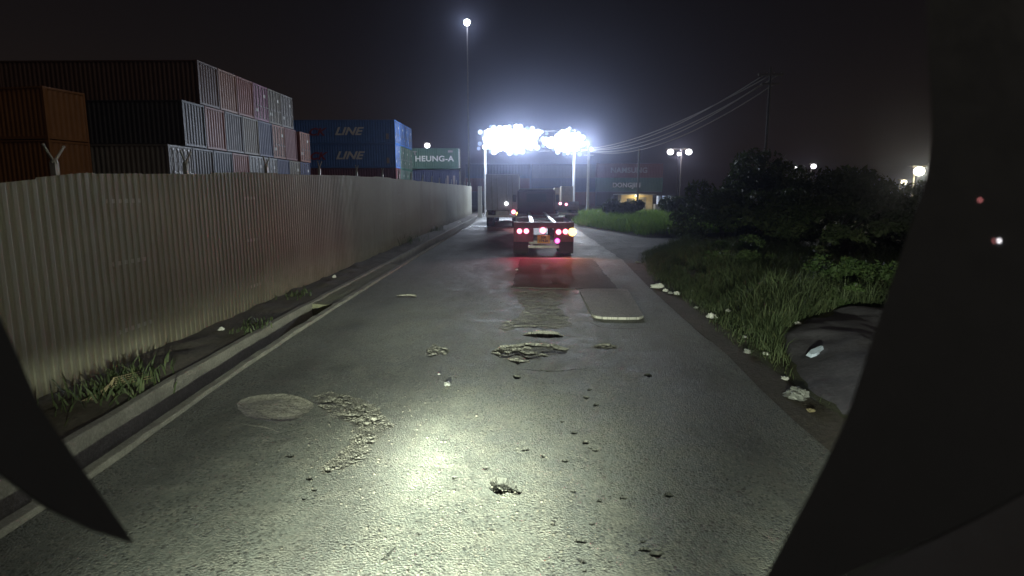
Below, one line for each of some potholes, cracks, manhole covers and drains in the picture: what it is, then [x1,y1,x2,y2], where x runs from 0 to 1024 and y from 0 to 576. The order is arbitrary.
pothole [489,476,523,495]
pothole [491,343,569,365]
